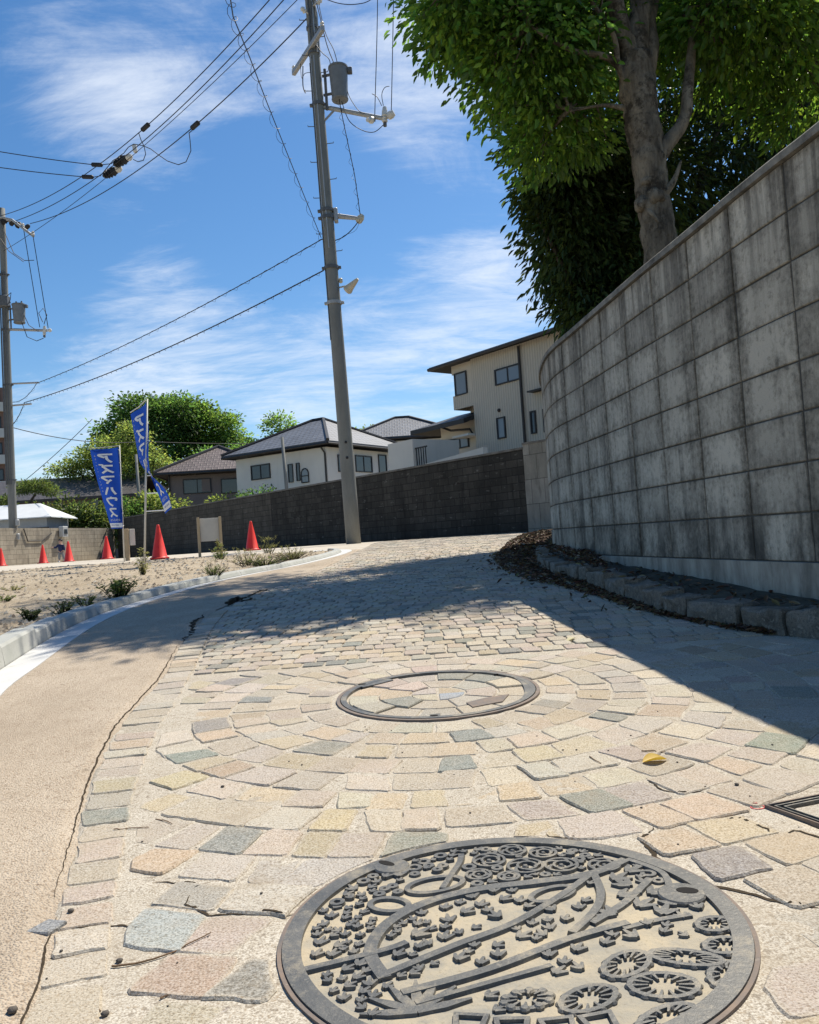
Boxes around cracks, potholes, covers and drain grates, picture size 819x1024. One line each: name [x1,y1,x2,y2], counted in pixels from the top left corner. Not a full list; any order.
utility cover [764,794,819,829]
crack [162,881,293,916]
manhole cover [336,670,540,722]
manhole cover [277,837,761,1024]
crack [20,915,58,1024]
crack [54,614,204,897]
